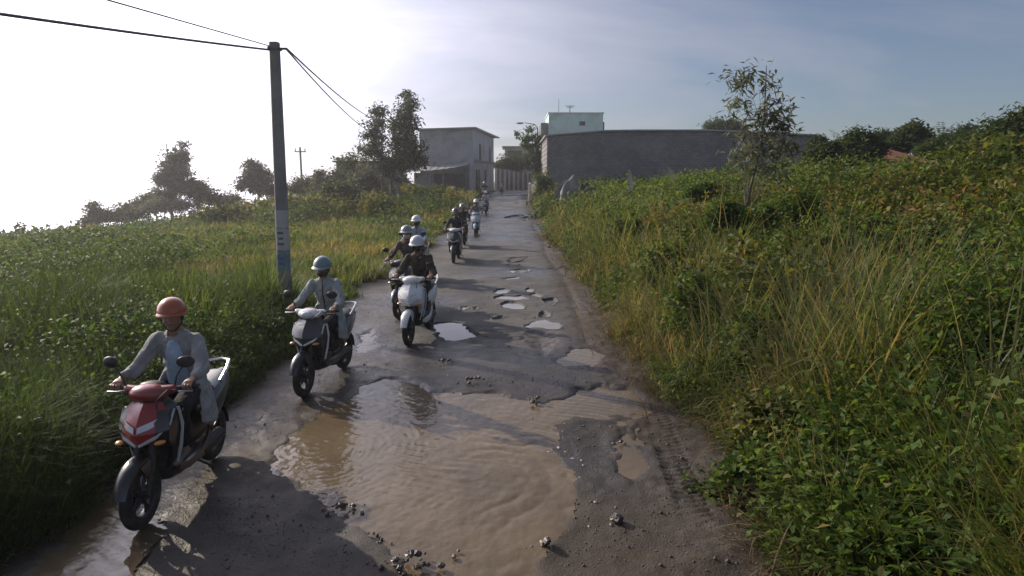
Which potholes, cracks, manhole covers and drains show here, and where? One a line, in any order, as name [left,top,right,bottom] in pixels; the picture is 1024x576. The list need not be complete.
pothole [522,320,565,330]
pothole [536,310,552,318]
pothole [497,300,527,310]
pothole [543,342,619,370]
pothole [240,370,668,576]
pothole [431,321,482,341]
